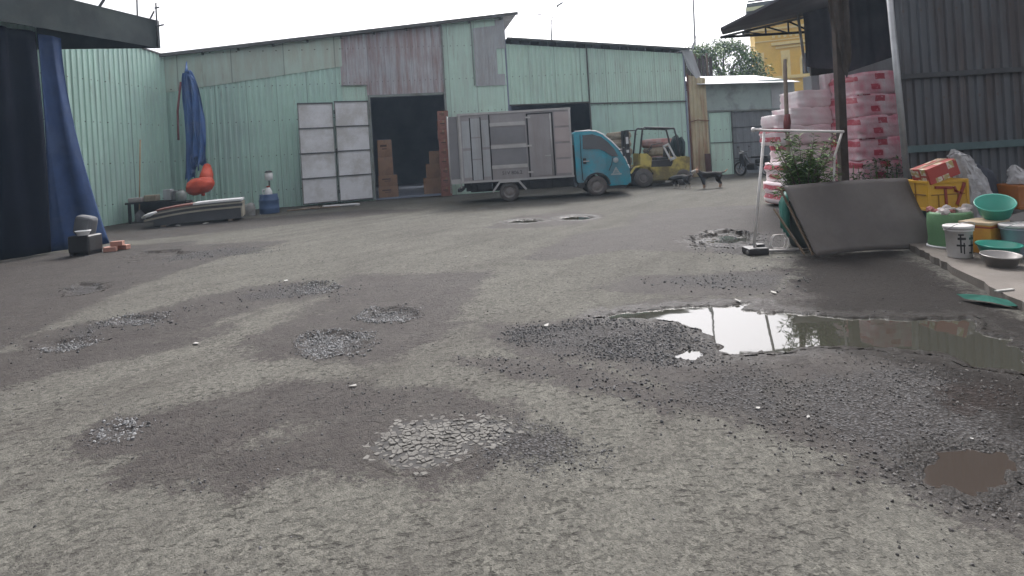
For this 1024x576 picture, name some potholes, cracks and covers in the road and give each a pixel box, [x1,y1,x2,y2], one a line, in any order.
pothole [287,280,337,294]
pothole [290,327,383,362]
pothole [688,229,769,249]
pothole [28,334,111,353]
pothole [359,304,424,325]
pothole [589,300,1024,375]
pothole [59,281,117,297]
pothole [104,313,172,328]
pothole [84,419,147,446]
pothole [898,441,1024,512]
